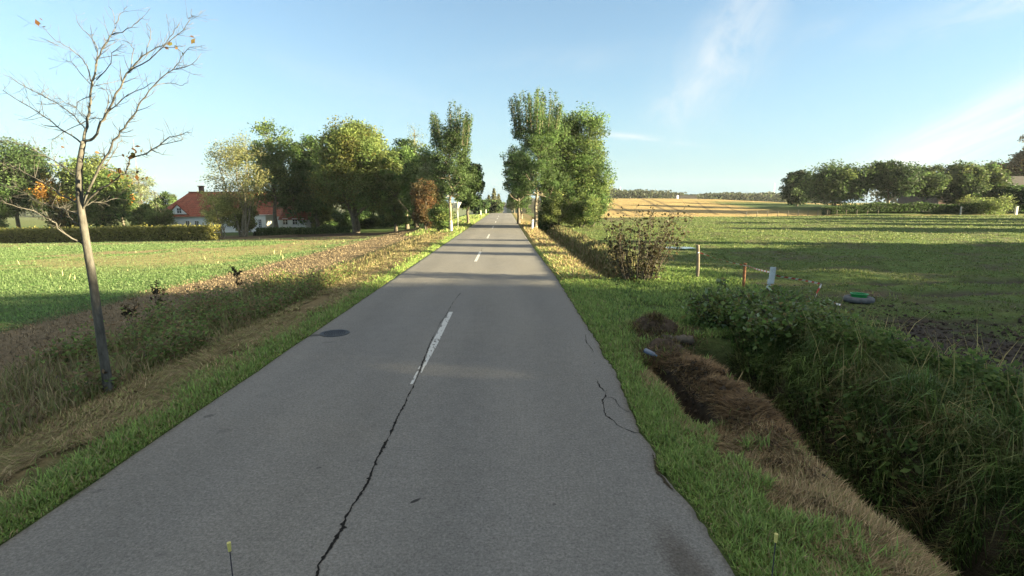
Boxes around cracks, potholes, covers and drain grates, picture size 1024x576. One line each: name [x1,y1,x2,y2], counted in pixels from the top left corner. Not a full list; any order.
crack [597,381,637,433]
crack [316,293,461,576]
crack [652,454,673,490]
